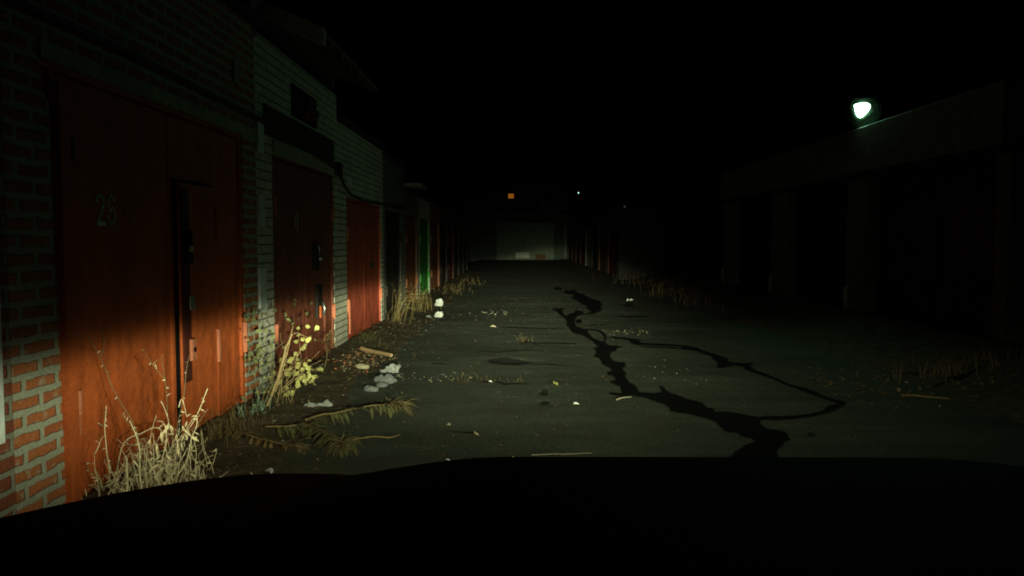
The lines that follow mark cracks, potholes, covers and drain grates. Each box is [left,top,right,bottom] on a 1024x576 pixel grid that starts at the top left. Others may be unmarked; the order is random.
crack [480,287,846,457]
